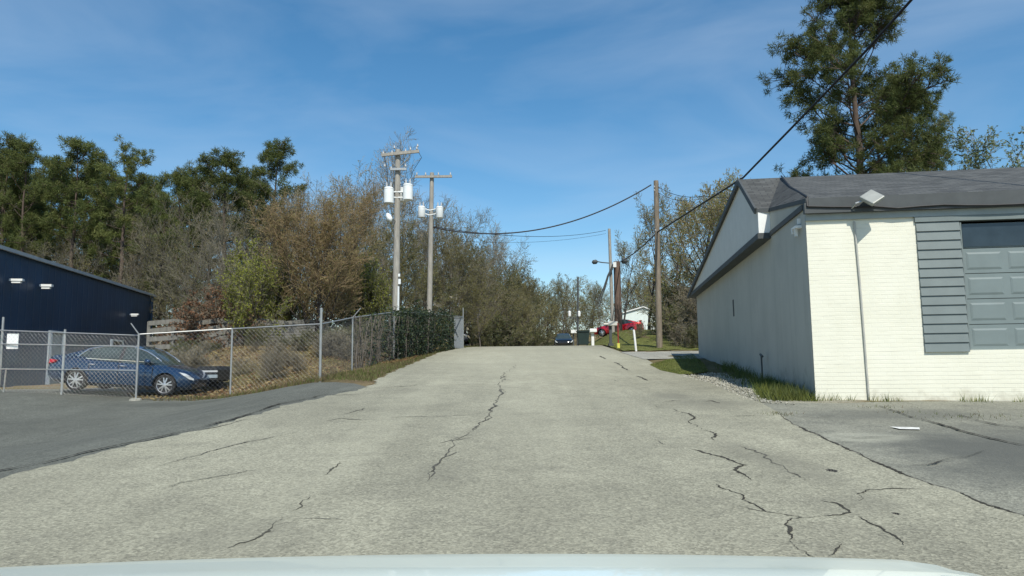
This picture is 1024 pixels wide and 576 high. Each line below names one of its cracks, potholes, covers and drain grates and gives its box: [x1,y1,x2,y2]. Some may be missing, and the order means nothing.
crack [656,401,842,557]
crack [228,463,340,548]
crack [821,488,913,545]
crack [415,366,515,481]
